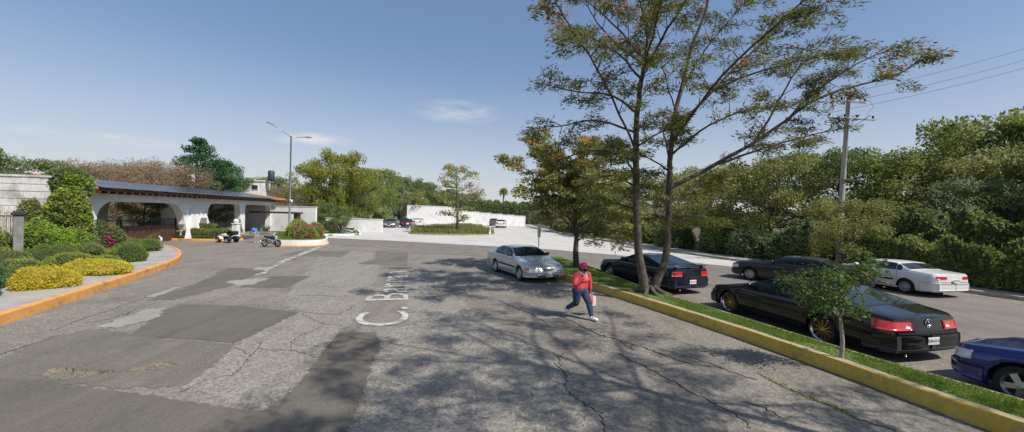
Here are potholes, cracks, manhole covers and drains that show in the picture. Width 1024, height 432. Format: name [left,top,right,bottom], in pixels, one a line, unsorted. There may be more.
pothole [127,361,177,372]
crack [560,316,896,432]
crack [180,286,351,392]
pothole [39,367,115,380]
